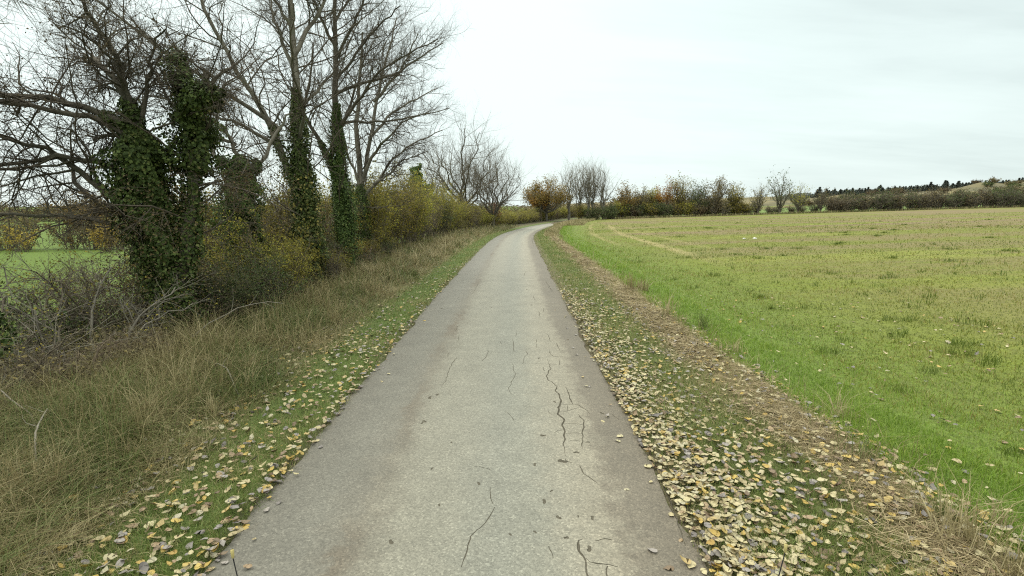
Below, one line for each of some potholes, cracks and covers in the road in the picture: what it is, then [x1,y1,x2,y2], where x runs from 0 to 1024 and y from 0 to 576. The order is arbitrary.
crack [577,538,617,576]
crack [461,491,495,567]
crack [482,333,597,483]
